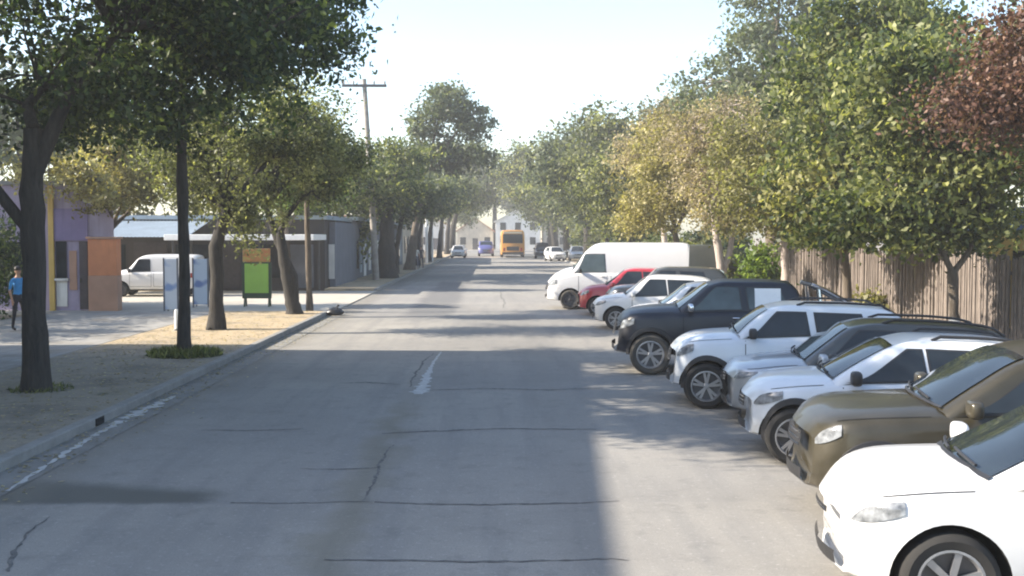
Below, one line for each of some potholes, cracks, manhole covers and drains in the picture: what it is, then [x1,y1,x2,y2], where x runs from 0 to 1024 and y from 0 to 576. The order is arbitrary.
crack [6,517,49,571]
crack [231,428,610,505]
